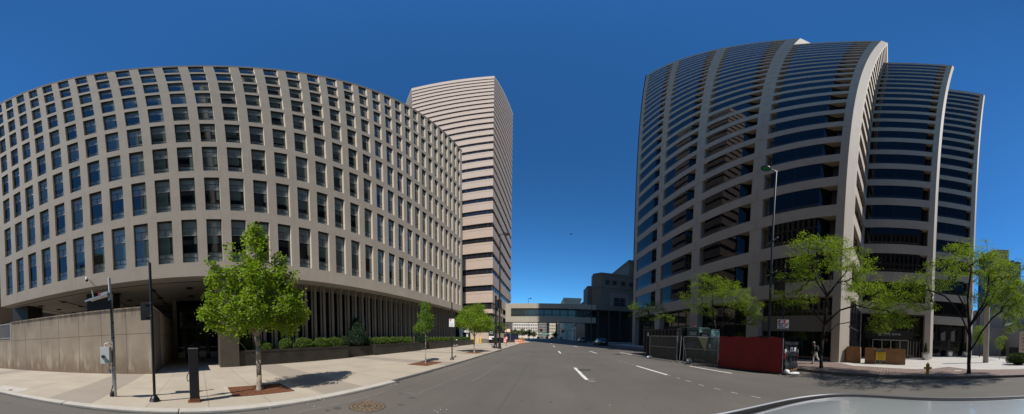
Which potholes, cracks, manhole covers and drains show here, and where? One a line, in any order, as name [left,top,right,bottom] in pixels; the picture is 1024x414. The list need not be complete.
manhole cover [349,401,386,412]
